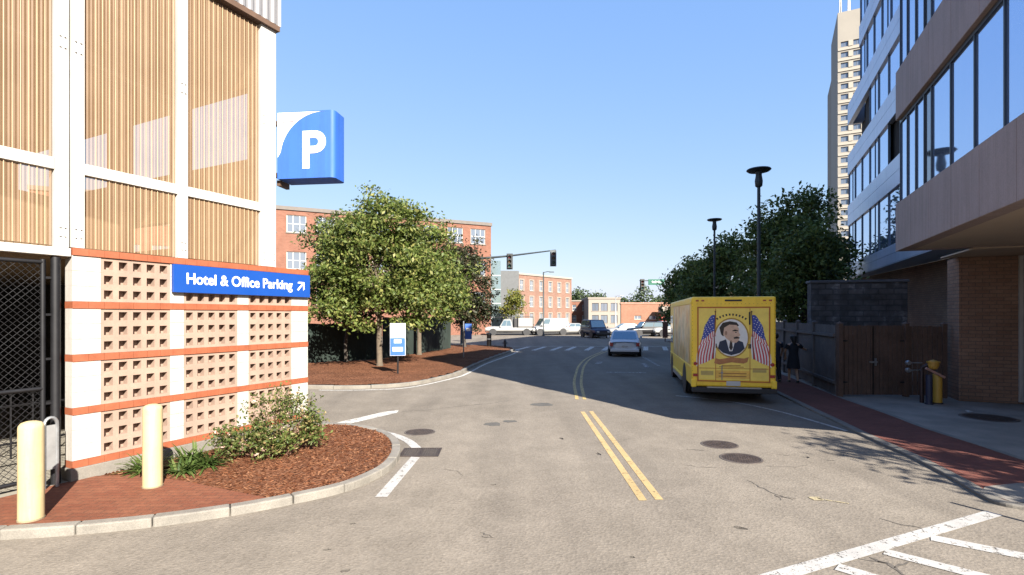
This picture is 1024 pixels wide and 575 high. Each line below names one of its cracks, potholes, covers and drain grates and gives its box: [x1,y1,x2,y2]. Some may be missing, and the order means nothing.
crack [858,557,909,575]
drain grate [400,448,442,457]
manhole cover [719,453,764,464]
manhole cover [700,440,739,449]
manhole cover [958,413,1021,422]
